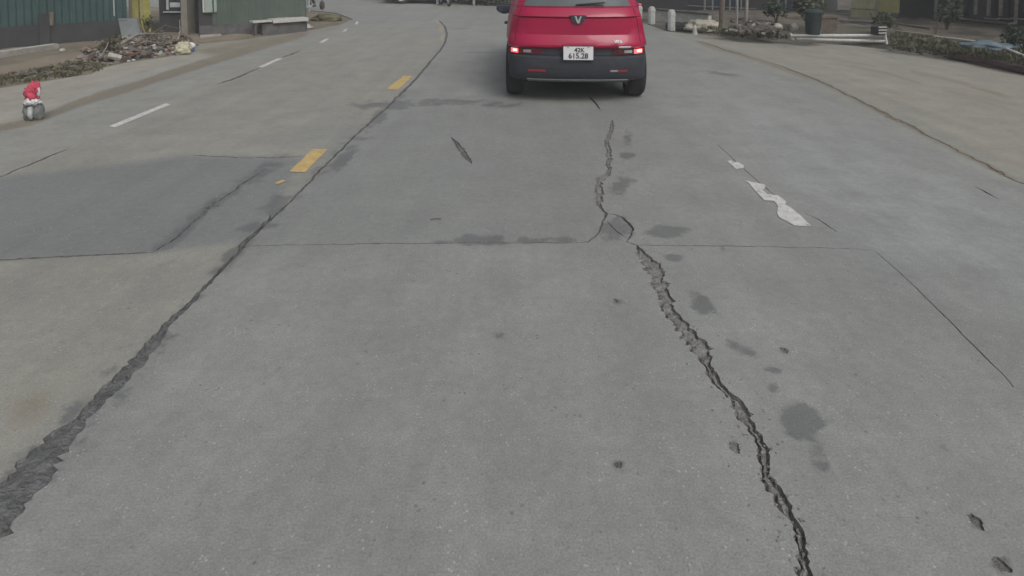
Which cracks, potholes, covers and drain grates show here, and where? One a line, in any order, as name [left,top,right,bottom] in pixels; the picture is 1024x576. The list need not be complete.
pothole [992,556,1013,573]
crack [579,96,813,576]
crack [451,137,472,164]
pothole [967,513,985,531]
crack [0,149,67,177]
